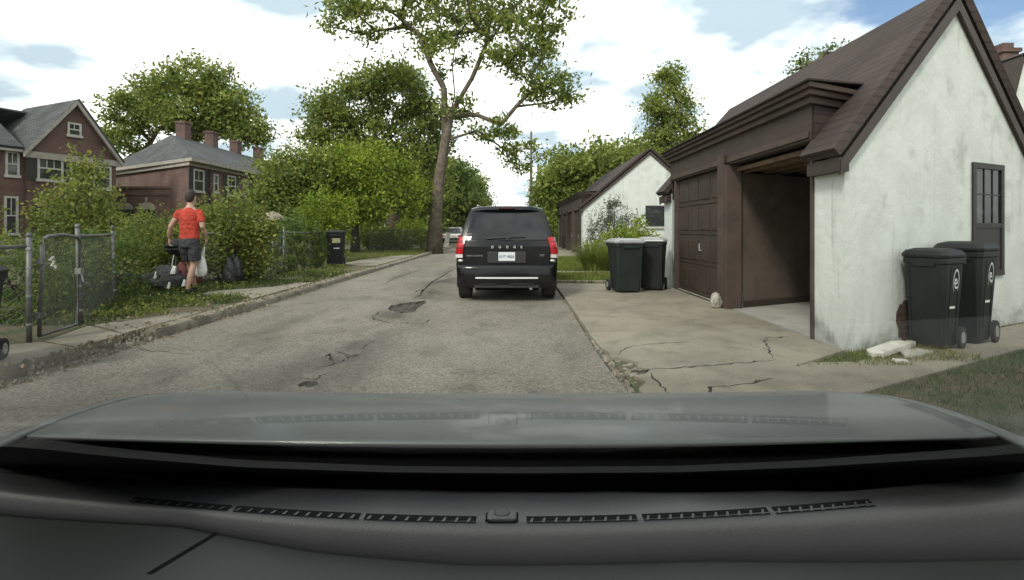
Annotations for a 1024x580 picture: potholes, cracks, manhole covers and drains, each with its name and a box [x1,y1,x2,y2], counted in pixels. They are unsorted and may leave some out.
crack [376,267,450,300]
crack [288,340,375,381]
pothole [388,300,426,313]
